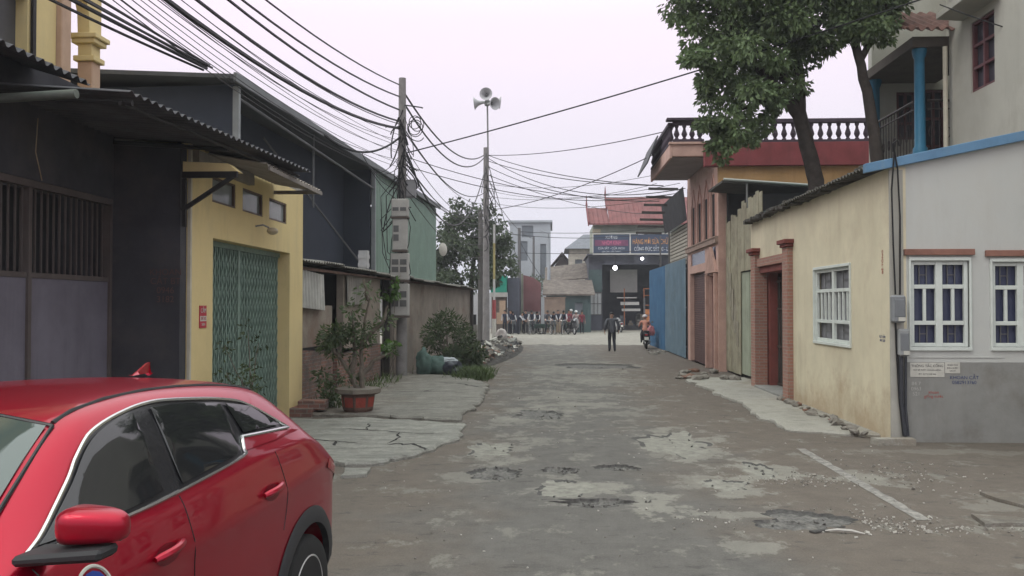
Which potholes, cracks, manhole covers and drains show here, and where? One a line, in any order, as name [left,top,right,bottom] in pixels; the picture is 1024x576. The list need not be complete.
pothole [511,408,563,420]
pothole [752,509,864,531]
pothole [466,466,523,482]
crack [315,424,445,450]
pothole [541,498,652,508]
